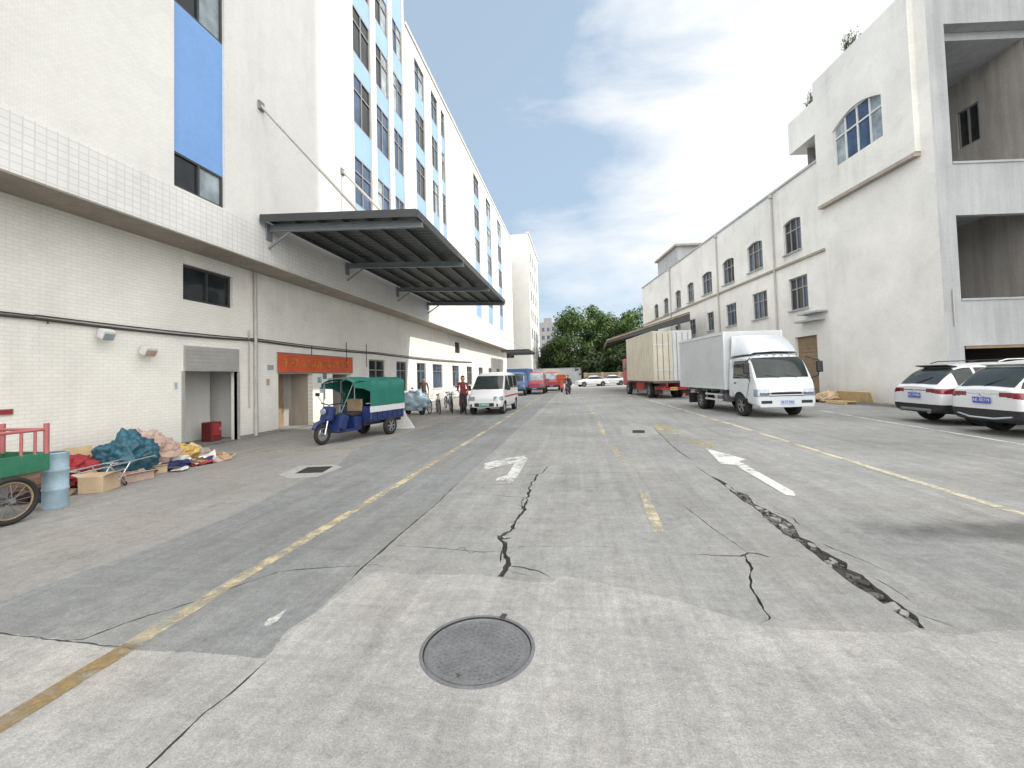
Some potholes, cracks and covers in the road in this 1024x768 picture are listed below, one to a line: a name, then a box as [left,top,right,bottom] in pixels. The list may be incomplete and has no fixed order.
crack [655,429,961,630]
crack [0,565,361,649]
manhole cover [419,613,535,690]
crack [397,470,611,577]
